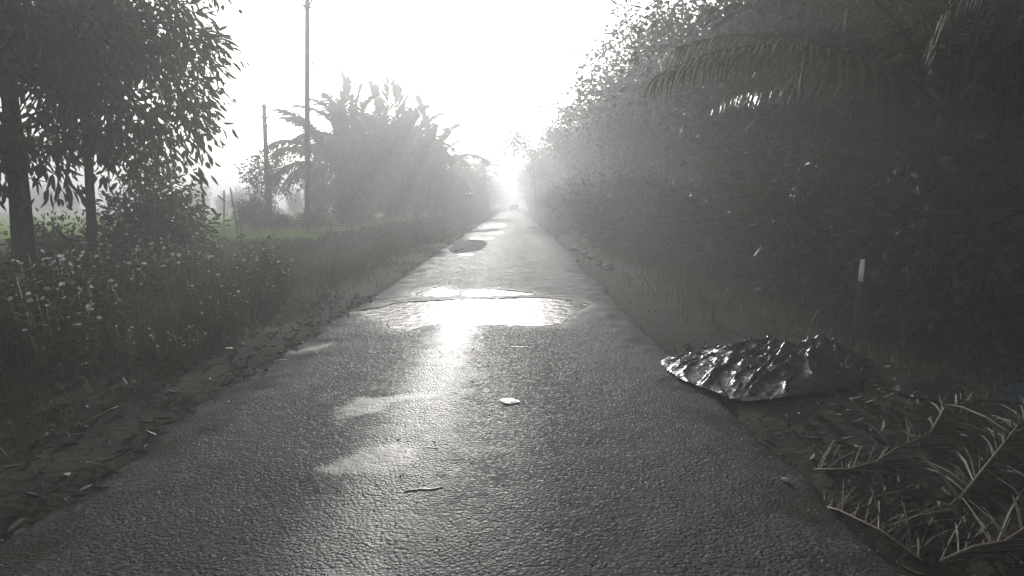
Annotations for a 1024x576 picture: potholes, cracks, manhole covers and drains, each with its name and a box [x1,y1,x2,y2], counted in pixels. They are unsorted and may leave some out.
pothole [415,286,461,297]
pothole [349,297,592,331]
pothole [444,240,487,254]
